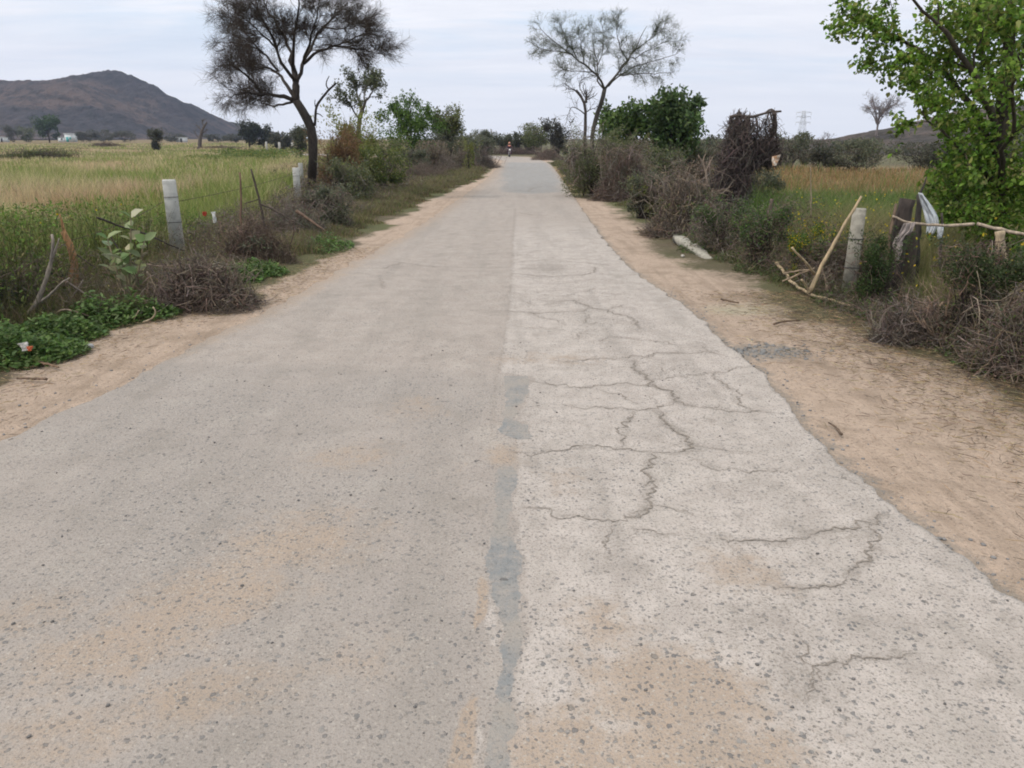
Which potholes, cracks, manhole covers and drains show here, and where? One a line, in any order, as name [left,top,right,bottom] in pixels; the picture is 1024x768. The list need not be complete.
crack [720,513,882,589]
crack [793,631,908,701]
crack [514,259,759,411]
crack [520,363,793,557]
